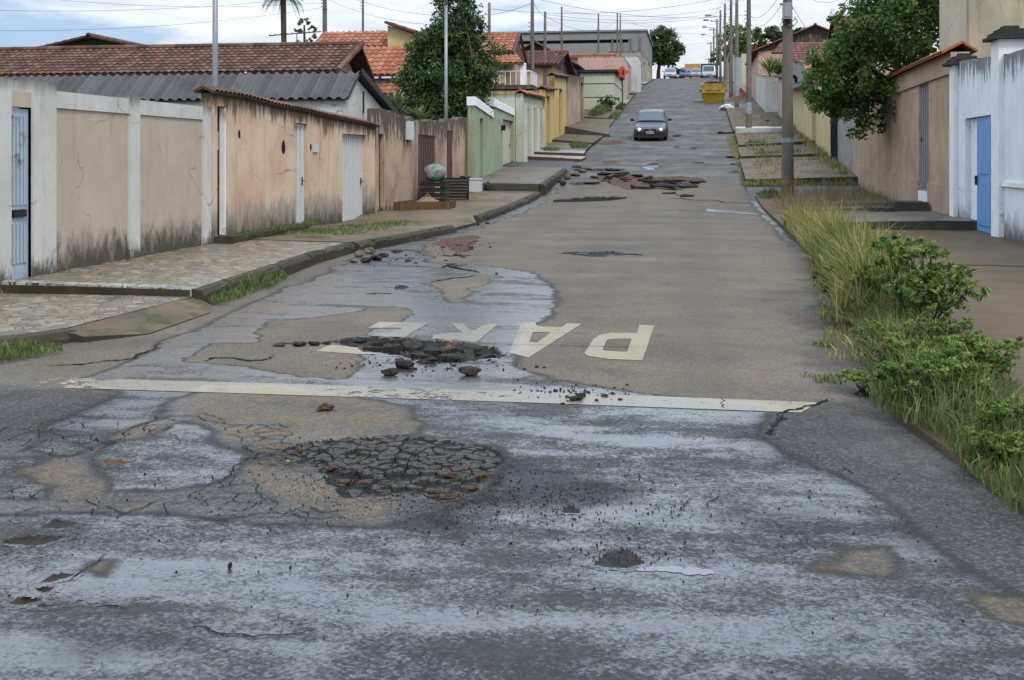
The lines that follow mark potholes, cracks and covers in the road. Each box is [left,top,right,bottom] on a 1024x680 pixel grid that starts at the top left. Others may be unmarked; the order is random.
pothole [16,582,66,599]
pothole [0,531,94,548]
crack [187,626,319,637]
crack [776,398,828,415]
pothole [269,432,531,504]
pothole [578,546,715,575]
crack [49,340,171,366]
pothole [592,171,711,191]
pothole [30,516,87,532]
pothole [0,590,52,610]
pothole [551,250,652,258]
